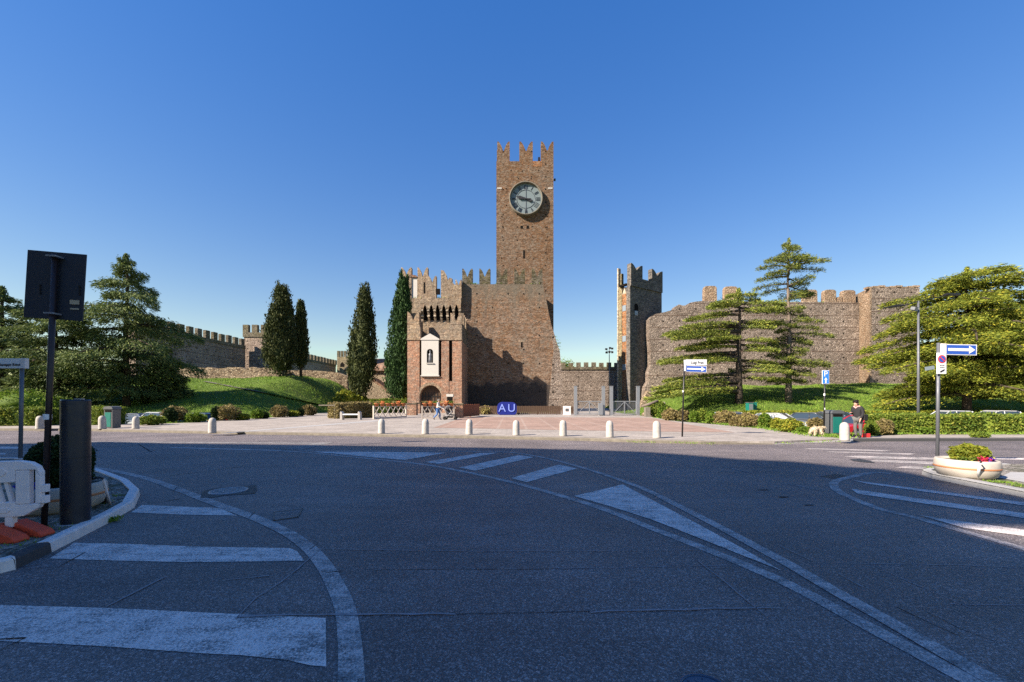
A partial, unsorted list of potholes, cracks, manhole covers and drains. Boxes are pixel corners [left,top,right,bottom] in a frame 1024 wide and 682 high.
manhole cover [208,487,249,495]
